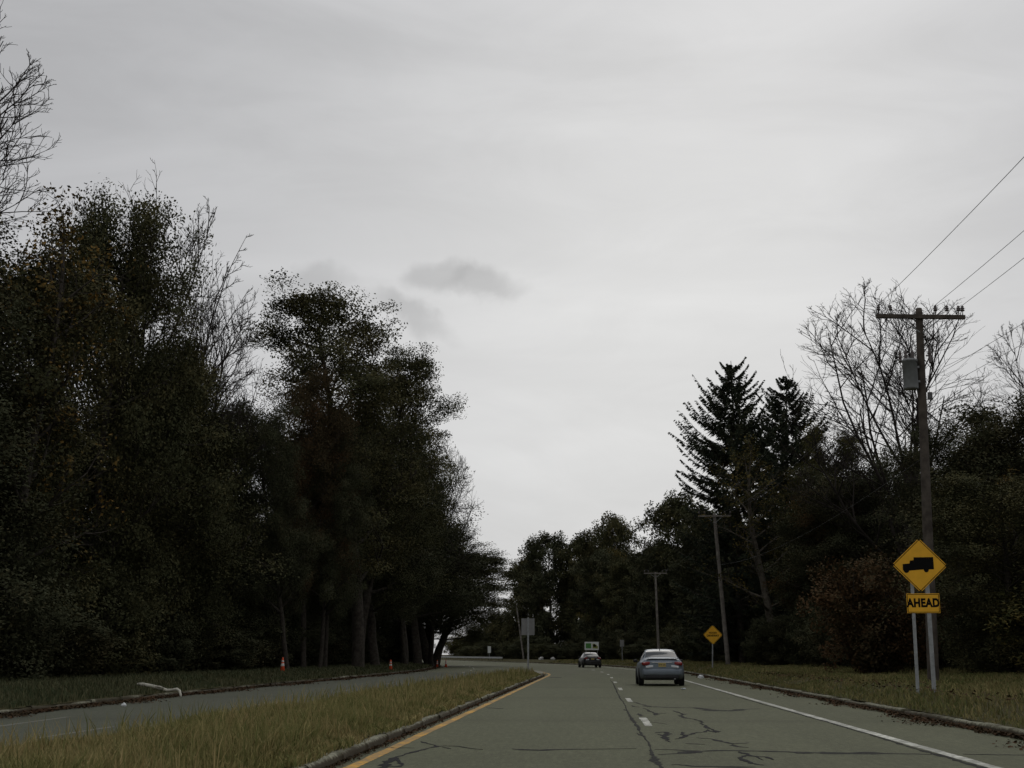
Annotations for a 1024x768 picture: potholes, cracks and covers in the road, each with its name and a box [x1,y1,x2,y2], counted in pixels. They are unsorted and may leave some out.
crack [631,702,774,768]
